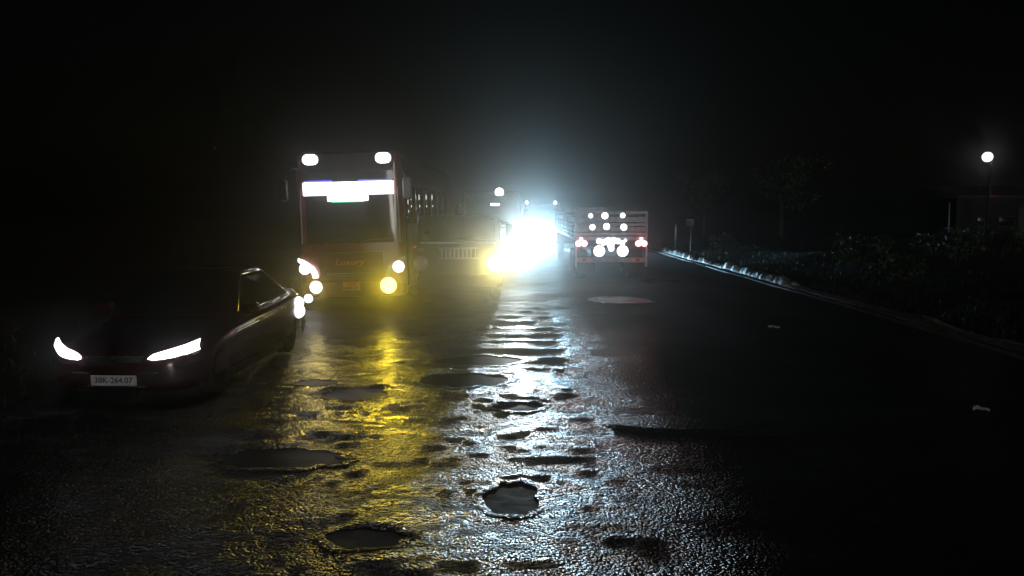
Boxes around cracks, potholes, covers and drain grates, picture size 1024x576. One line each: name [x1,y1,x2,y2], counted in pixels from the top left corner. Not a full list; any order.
pothole [424,353,531,367]
pothole [489,400,553,414]
pothole [409,371,518,389]
pothole [313,385,397,402]
pothole [312,522,421,553]
pothole [203,445,358,472]
pothole [471,478,550,519]
